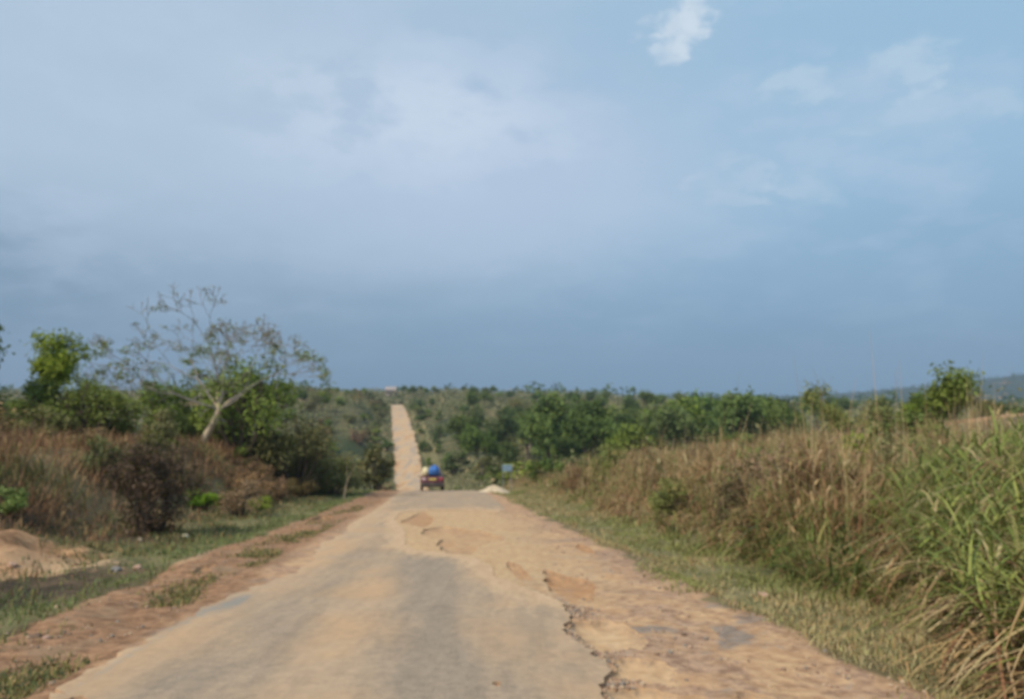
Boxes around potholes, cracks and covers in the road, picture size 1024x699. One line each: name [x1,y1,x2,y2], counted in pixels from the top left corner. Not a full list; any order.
pothole [421,526,505,554]
pothole [506,561,531,581]
pothole [401,512,434,527]
pothole [542,570,596,603]
pothole [575,544,595,554]
